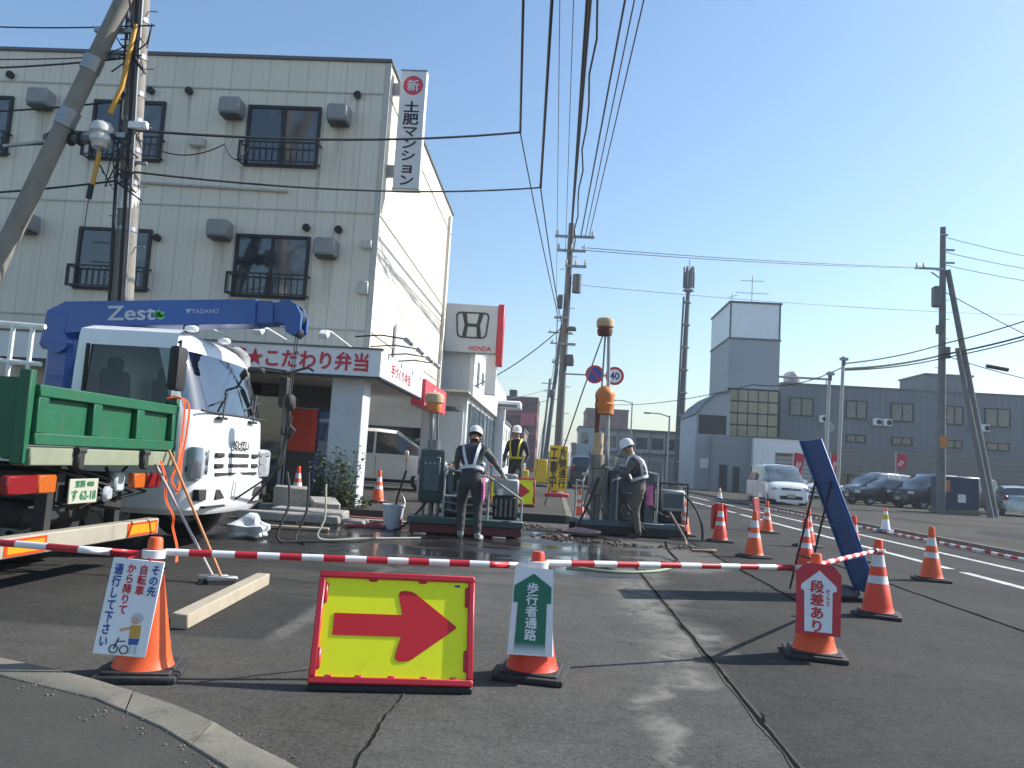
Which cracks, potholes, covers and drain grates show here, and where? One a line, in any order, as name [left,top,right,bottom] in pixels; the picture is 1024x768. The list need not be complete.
crack [353,692,406,768]
